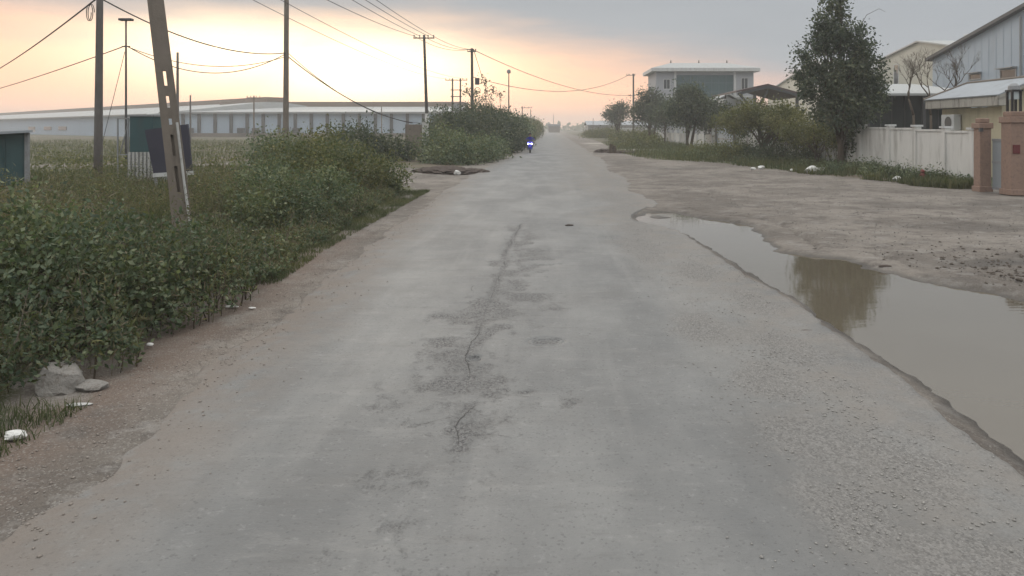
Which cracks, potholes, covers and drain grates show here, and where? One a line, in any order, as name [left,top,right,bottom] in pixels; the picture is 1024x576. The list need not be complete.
pothole [528,337,564,346]
crack [420,225,536,377]
